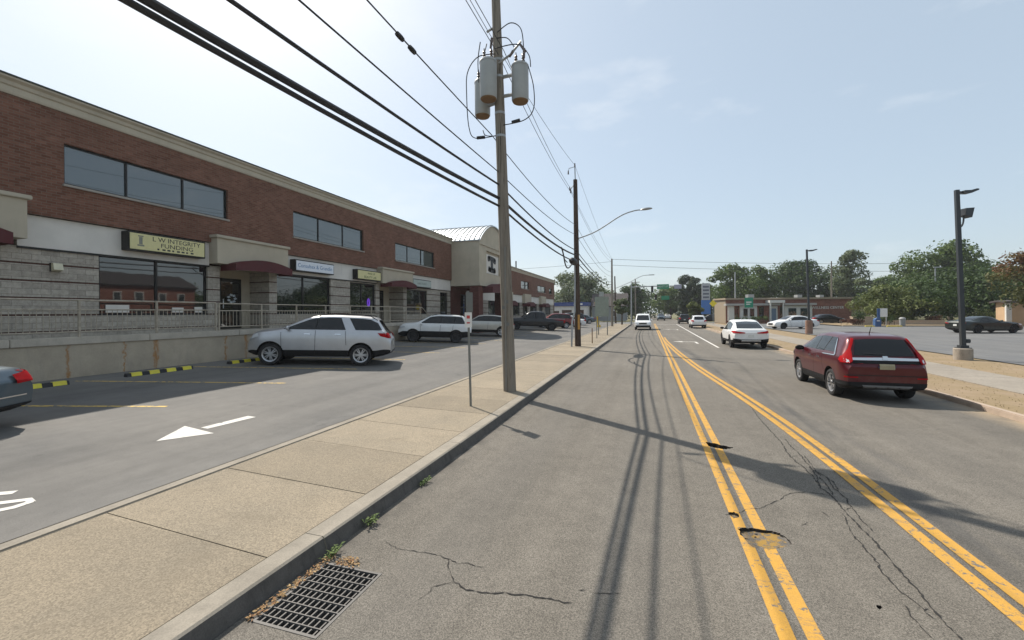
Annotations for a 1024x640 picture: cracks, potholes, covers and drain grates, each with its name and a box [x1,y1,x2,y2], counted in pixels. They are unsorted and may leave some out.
drain grate [251,562,382,639]
crack [725,406,963,640]
pothole [738,527,792,550]
crack [387,542,613,603]
